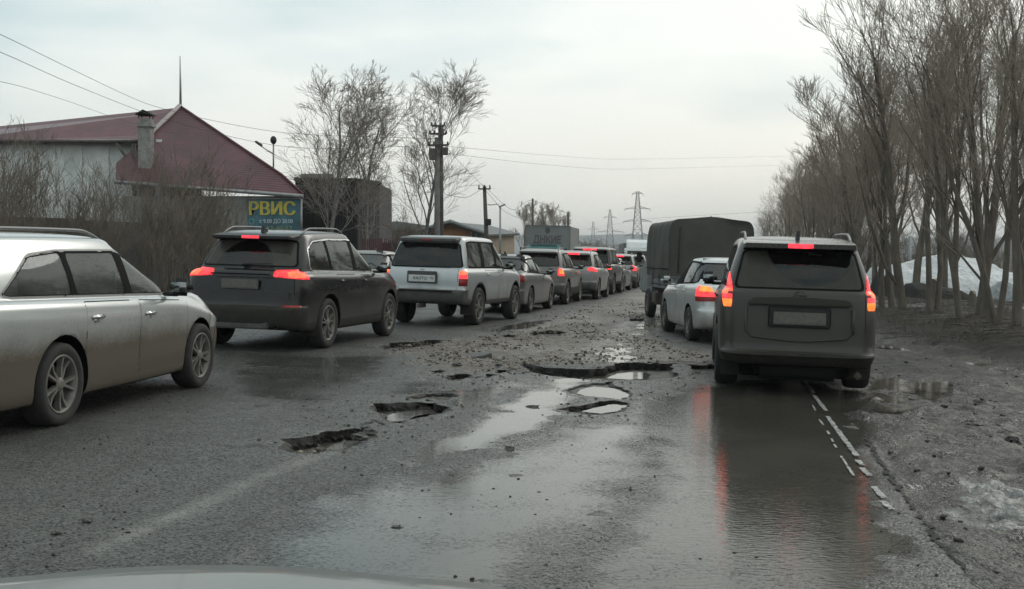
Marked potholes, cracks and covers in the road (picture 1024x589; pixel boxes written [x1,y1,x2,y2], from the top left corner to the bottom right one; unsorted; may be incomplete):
pothole [356,398,467,426]
pothole [557,381,644,402]
pothole [508,362,694,382]
pothole [262,427,385,458]
pothole [372,339,449,353]
pothole [432,373,478,382]
pothole [552,400,642,417]
